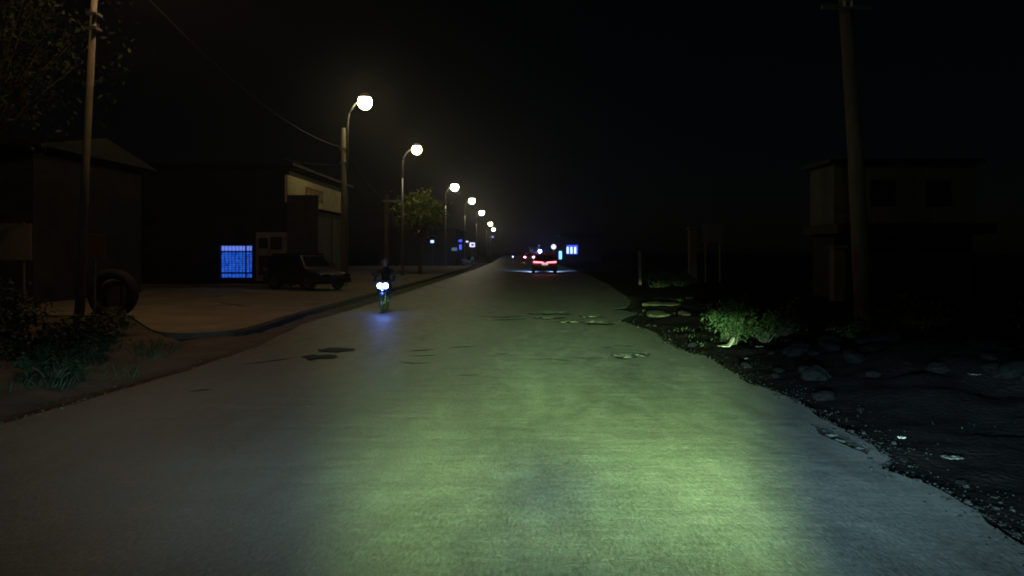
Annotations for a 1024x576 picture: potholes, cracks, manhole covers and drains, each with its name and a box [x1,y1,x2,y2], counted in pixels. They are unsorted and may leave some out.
pothole [811,423,869,455]
